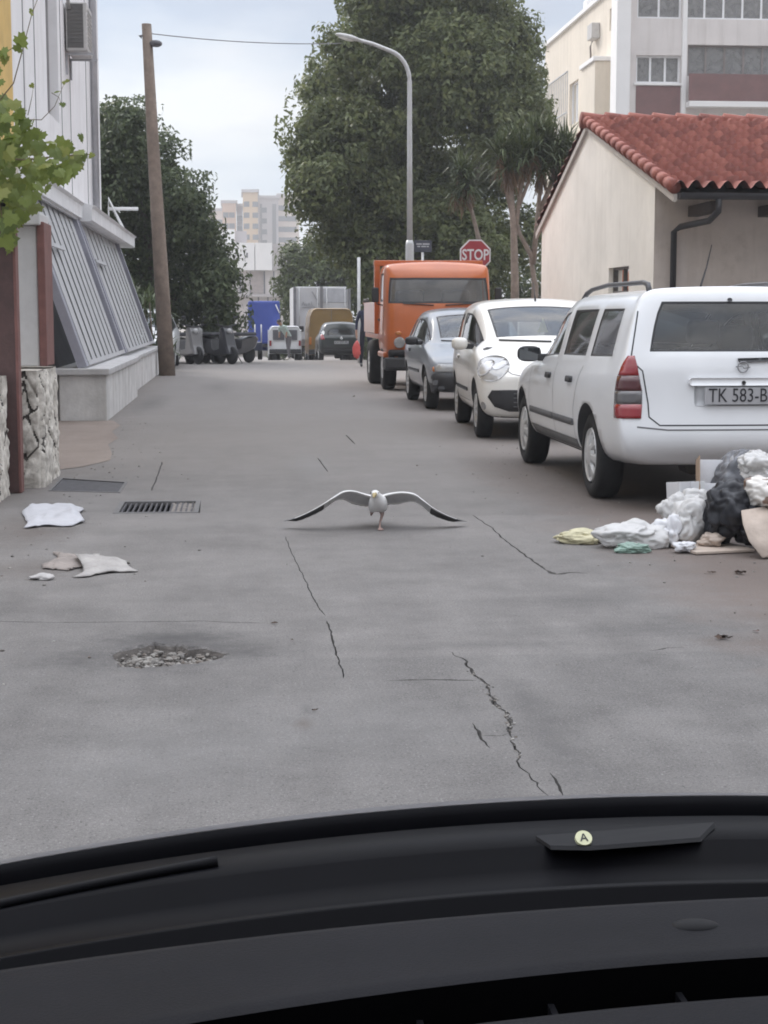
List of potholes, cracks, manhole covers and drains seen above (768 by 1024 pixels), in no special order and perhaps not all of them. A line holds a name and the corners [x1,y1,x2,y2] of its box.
crack [285,536,344,679]
crack [473,515,576,575]
drain grate [113,500,201,514]
pothole [109,641,232,669]
crack [388,652,563,796]
manhole cover [48,478,127,493]
